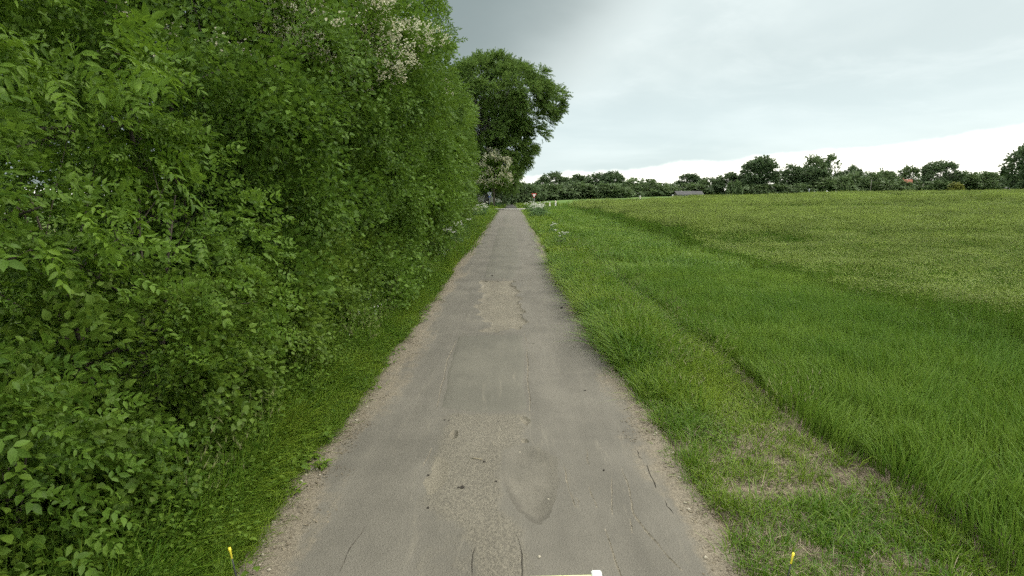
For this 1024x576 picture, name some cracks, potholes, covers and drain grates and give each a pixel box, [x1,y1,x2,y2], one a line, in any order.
crack [564,451,683,576]
crack [339,527,365,572]
crack [437,341,456,406]
crack [523,333,535,411]
